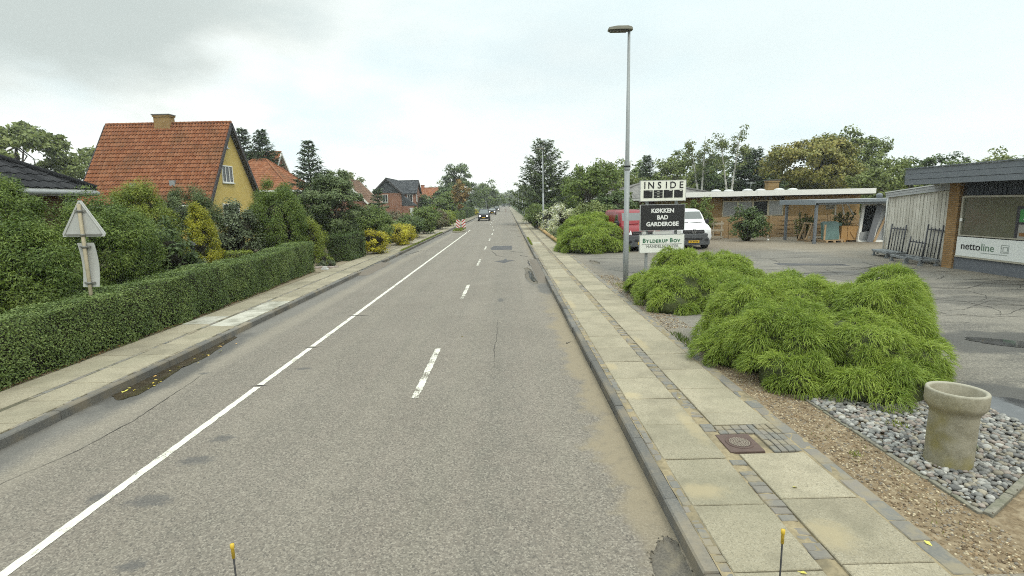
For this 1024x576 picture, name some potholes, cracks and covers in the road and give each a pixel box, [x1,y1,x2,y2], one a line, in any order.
pothole [524,267,538,284]
manhole cover [715,434,765,454]
